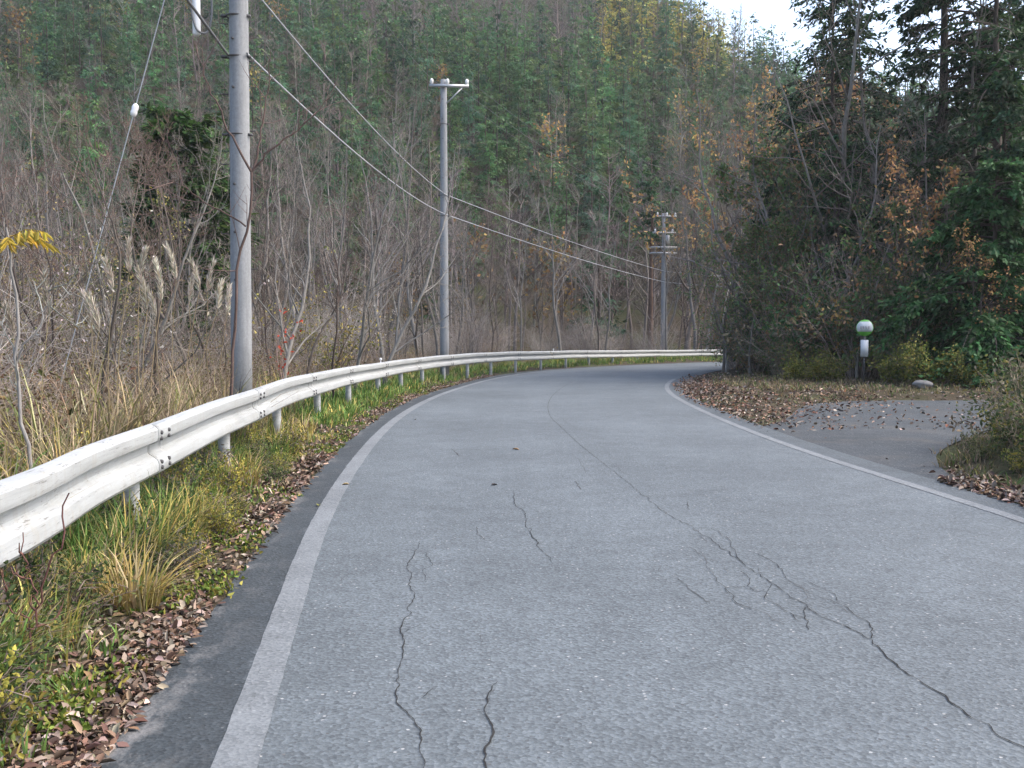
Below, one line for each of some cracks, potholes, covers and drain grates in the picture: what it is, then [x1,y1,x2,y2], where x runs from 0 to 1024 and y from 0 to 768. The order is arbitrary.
crack [483,681,498,768]
crack [395,543,433,768]
